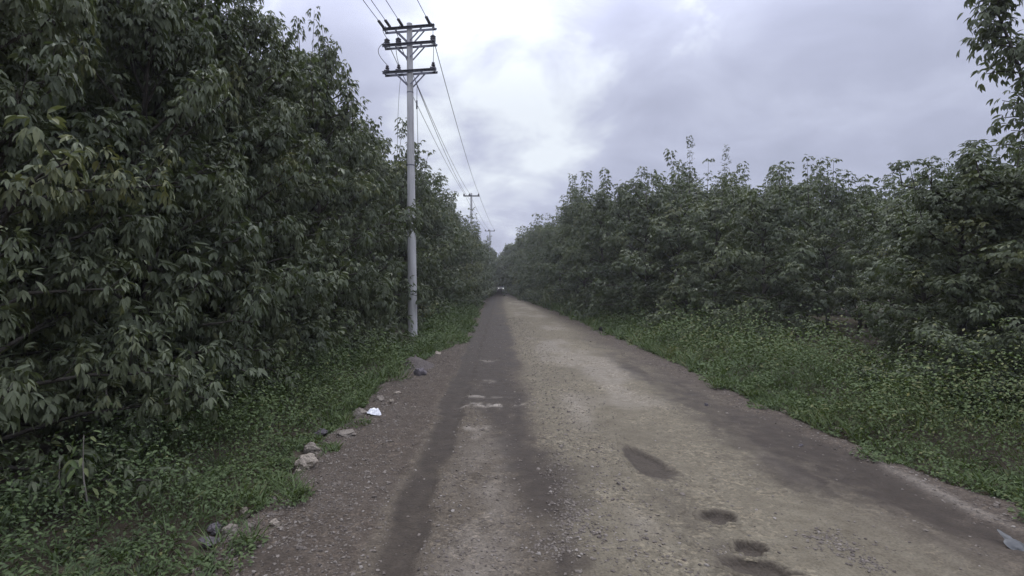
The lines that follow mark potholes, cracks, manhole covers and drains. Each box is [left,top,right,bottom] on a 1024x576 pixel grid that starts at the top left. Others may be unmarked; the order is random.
pothole [617,441,695,488]
pothole [729,538,775,562]
pothole [703,553,812,576]
pothole [692,507,743,528]
